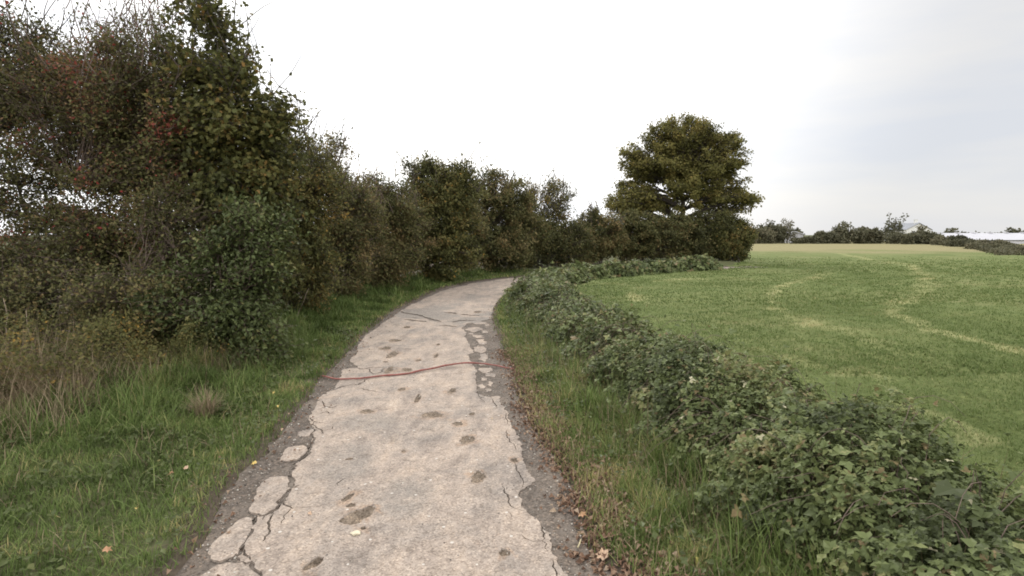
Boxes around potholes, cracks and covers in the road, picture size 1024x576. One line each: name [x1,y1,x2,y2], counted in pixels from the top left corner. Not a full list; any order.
crack [232,402,324,576]
pothole [337,504,376,525]
crack [401,312,469,327]
pothole [459,435,475,445]
pothole [471,470,486,484]
